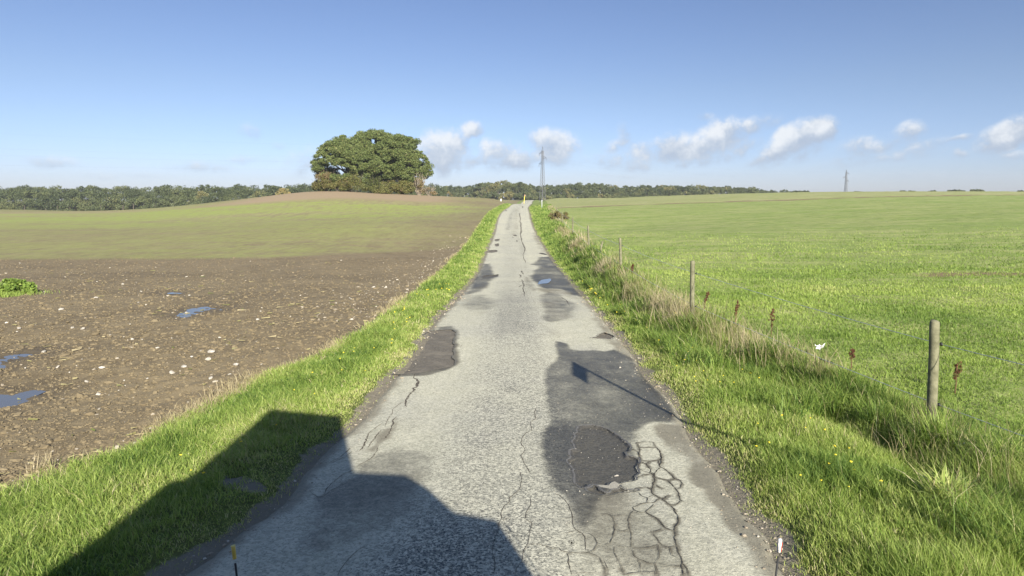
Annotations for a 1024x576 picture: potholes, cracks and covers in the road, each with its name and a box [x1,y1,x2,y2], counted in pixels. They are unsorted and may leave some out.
crack [519,214,533,298]
pothole [566,424,642,488]
crack [492,408,689,575]
crack [313,374,419,497]
